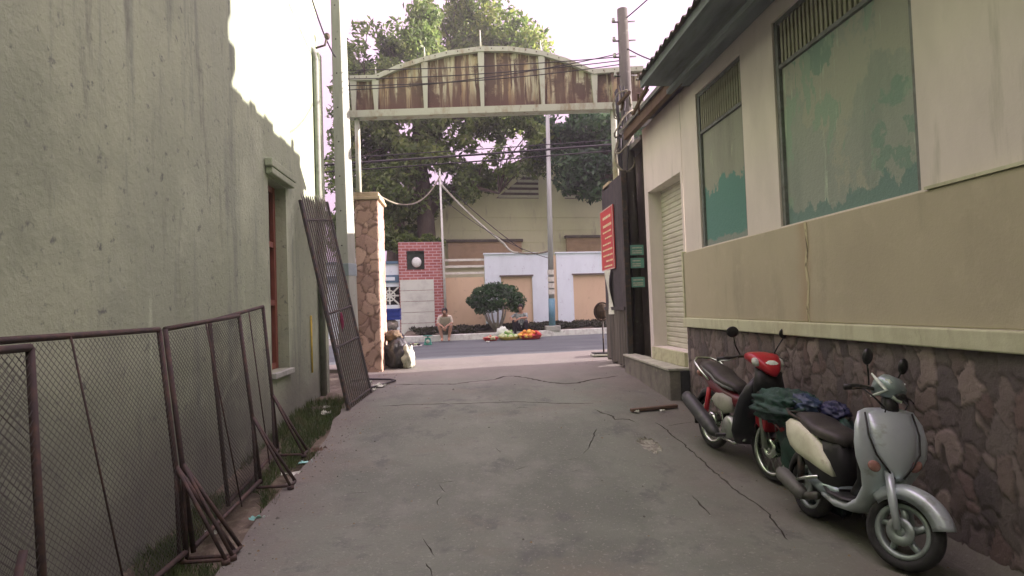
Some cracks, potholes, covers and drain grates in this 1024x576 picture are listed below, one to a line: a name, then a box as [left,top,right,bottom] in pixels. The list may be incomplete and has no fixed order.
pothole [636,436,662,454]
crack [391,402,632,472]
crack [397,376,614,385]
